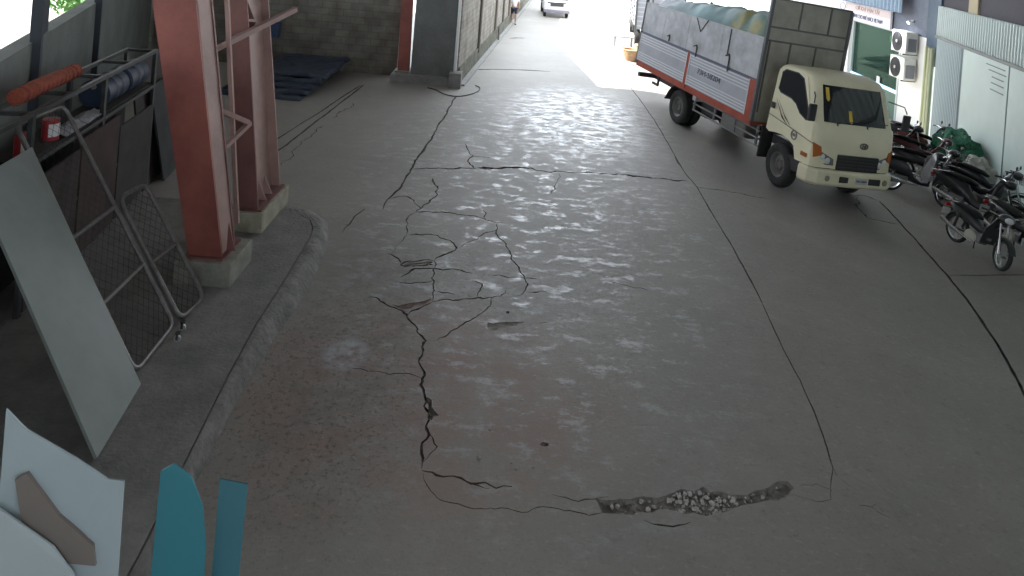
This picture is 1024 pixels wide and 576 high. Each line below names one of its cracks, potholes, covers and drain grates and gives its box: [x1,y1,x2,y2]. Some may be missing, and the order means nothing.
crack [352,144,767,516]
pothole [597,481,793,516]
